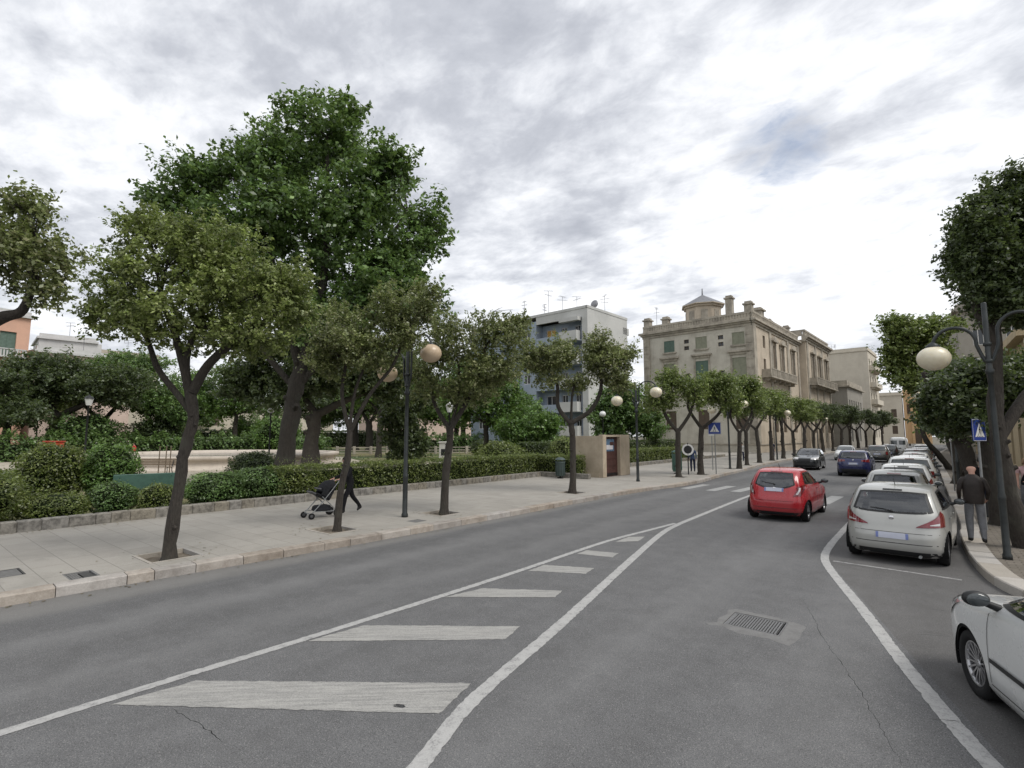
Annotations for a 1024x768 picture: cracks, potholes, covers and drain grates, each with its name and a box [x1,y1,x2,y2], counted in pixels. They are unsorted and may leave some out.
manhole cover [0,568,26,578]
manhole cover [62,570,100,580]
drain grate [707,609,806,646]
crack [803,602,901,761]
